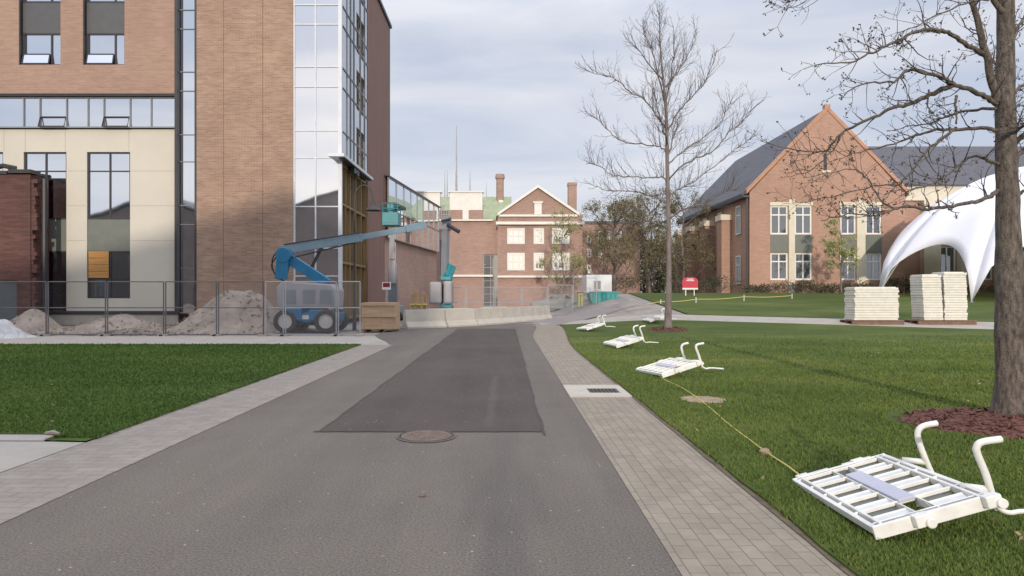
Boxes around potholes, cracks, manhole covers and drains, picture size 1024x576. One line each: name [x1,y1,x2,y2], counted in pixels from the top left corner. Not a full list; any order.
manhole cover [396,430,456,443]
drain grate [563,385,632,398]
